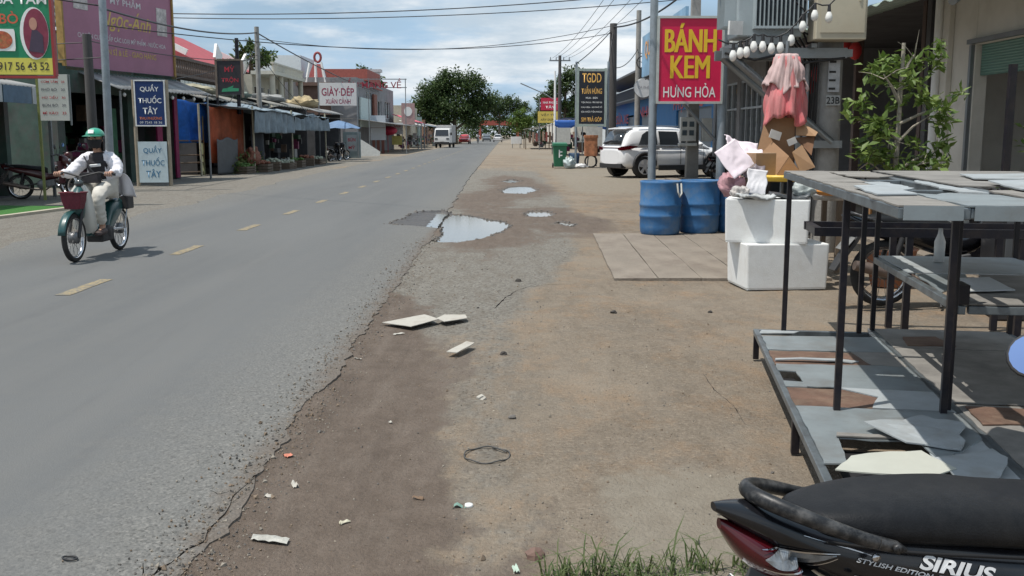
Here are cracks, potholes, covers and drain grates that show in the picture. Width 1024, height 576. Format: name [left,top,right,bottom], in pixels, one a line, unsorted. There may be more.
crack [143,472,261,575]
pothole [497,186,540,194]
pothole [384,209,513,243]
